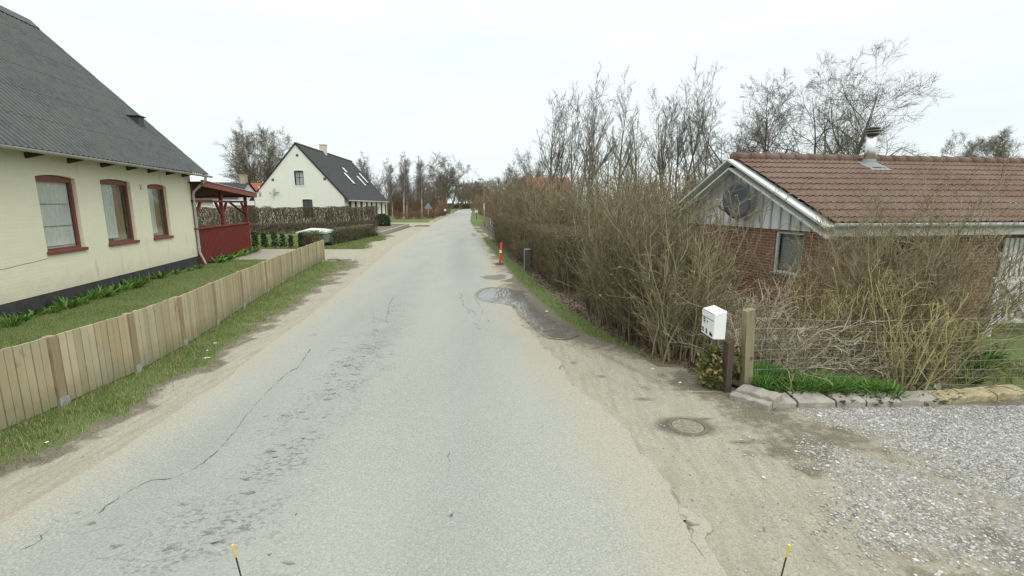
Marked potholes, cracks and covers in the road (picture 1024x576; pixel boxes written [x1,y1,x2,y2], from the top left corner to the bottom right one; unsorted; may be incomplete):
manhole cover [667,417,709,436]
pothole [474,287,579,340]
crack [99,349,310,513]
